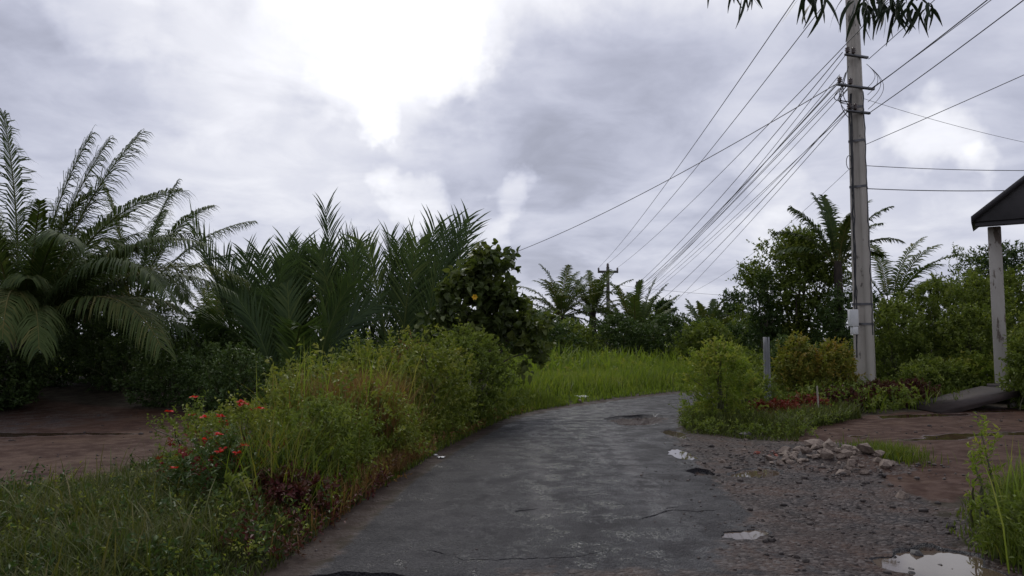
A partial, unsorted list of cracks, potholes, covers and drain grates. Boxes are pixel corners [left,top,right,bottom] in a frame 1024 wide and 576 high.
pothole [686,468,715,476]
pothole [658,429,688,439]
crack [611,504,714,520]
pothole [603,414,673,425]
crack [427,550,610,560]
